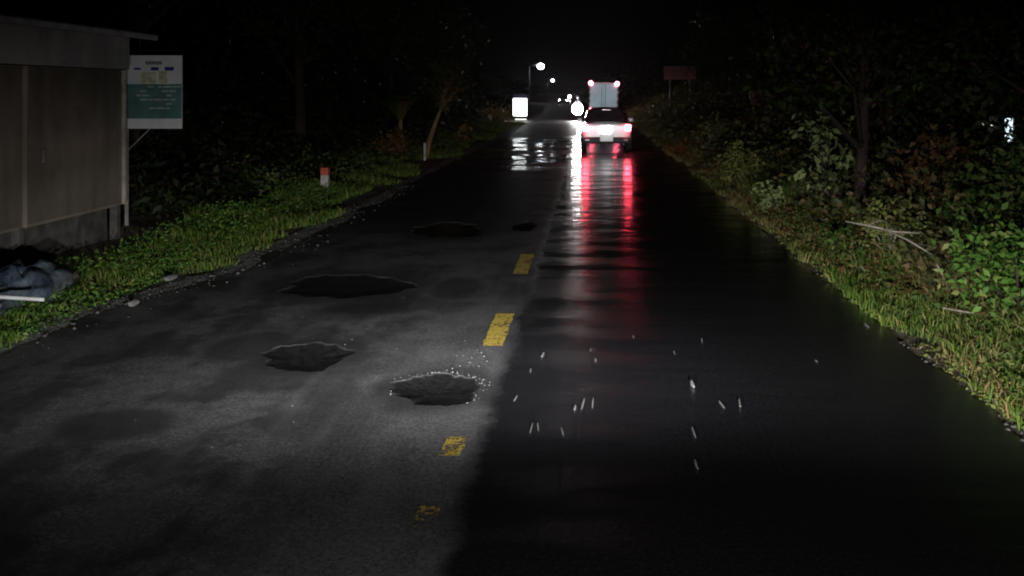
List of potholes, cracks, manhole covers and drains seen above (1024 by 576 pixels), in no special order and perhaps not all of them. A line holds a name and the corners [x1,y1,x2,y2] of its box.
pothole [389,372,481,406]
pothole [277,274,419,299]
pothole [409,222,484,238]
pothole [260,342,356,372]
pothole [509,221,537,231]
